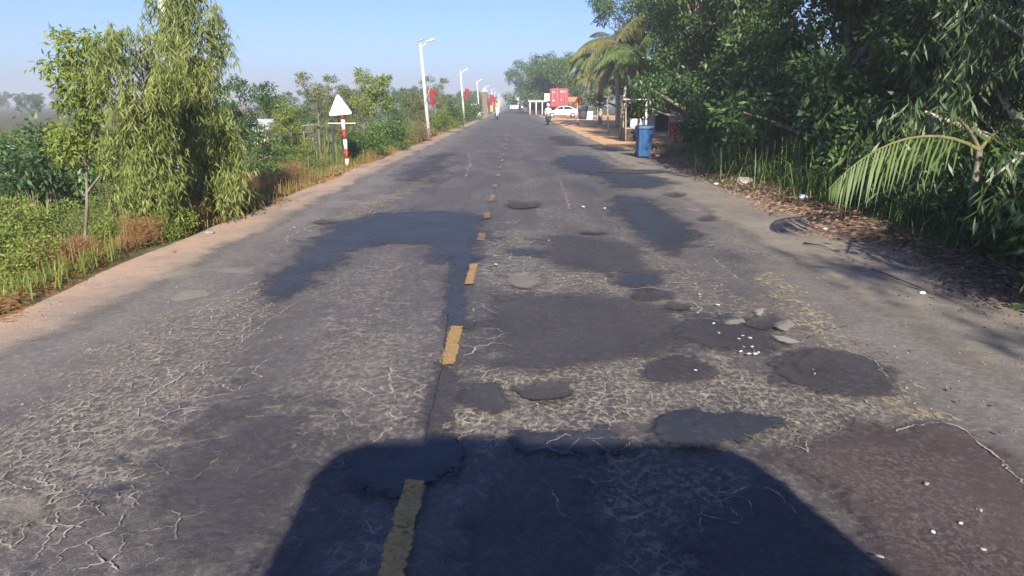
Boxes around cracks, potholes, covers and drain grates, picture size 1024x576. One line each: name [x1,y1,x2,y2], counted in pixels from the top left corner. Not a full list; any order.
crack [866,400,1024,484]
crack [237,347,443,492]
crack [0,279,284,573]
pothole [744,314,785,330]
